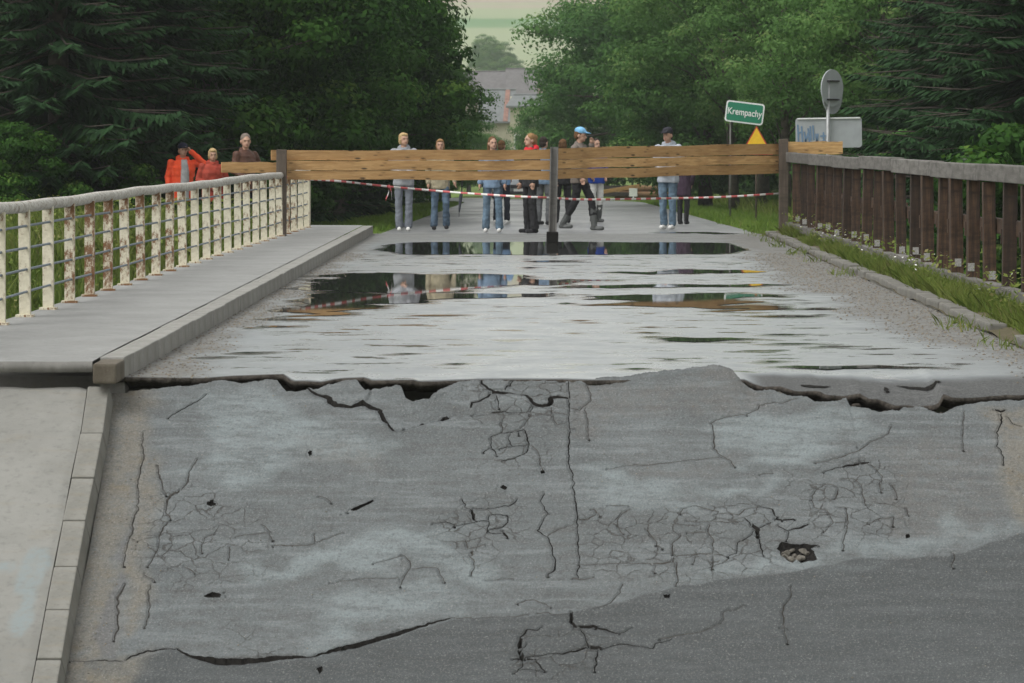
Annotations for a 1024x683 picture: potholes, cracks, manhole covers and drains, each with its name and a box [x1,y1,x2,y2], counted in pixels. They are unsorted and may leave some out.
crack [68,380,909,675]
crack [884,381,940,393]
pothole [776,542,820,564]
crack [994,409,1021,465]
